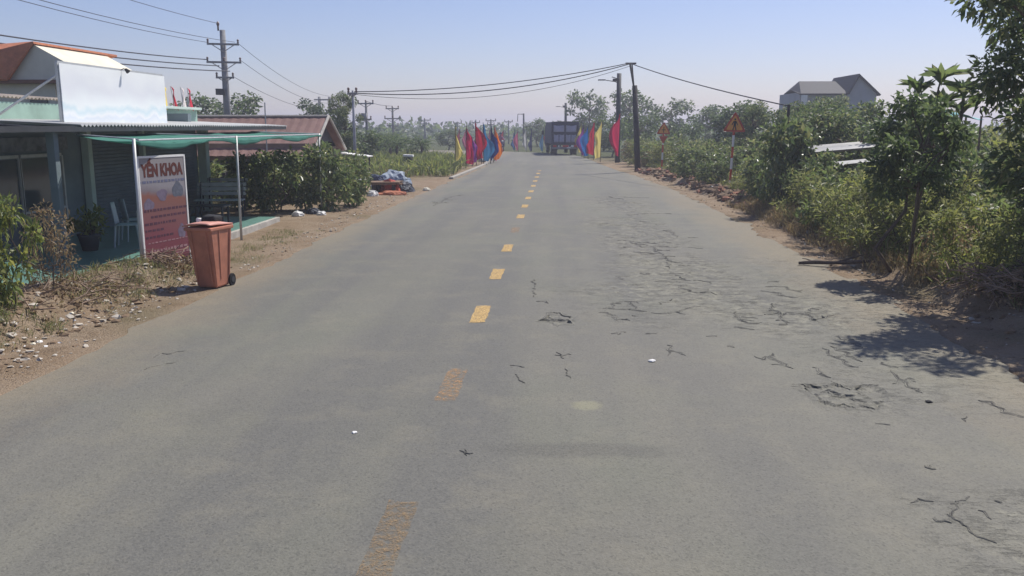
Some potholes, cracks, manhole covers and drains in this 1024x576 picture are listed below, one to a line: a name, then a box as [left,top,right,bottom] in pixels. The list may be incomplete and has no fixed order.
crack [911,496,1002,544]
pothole [791,381,900,415]
crack [961,400,1024,422]
crack [880,362,923,393]
crack [144,351,184,370]
crack [599,197,863,378]
pothole [534,311,575,327]
